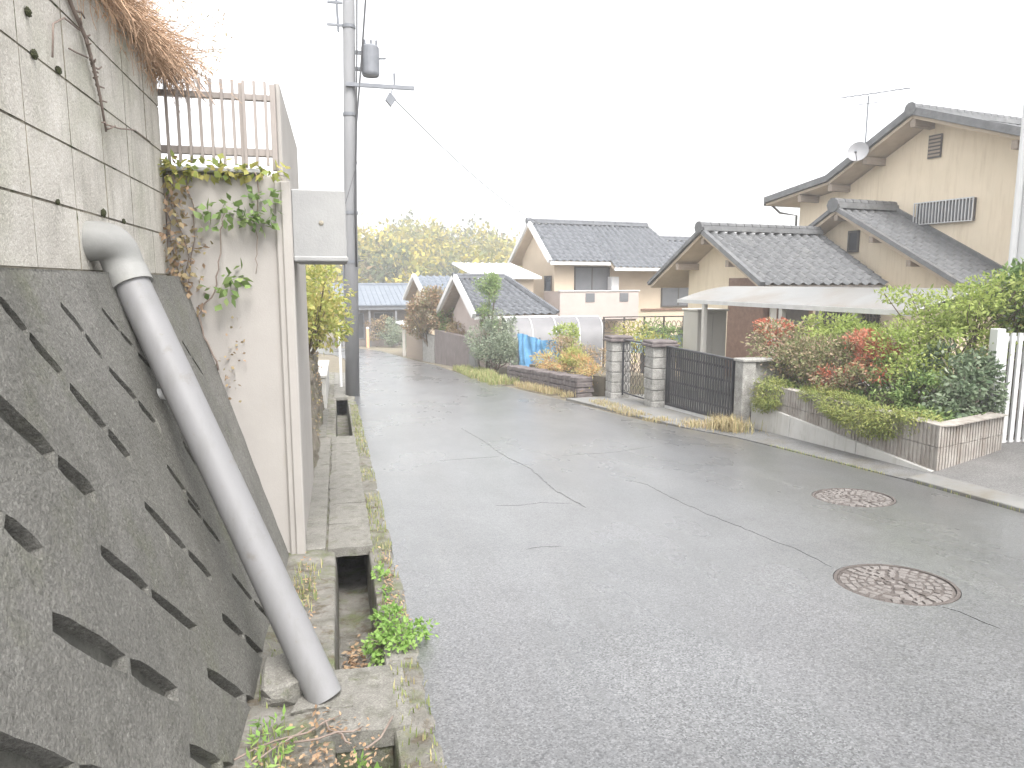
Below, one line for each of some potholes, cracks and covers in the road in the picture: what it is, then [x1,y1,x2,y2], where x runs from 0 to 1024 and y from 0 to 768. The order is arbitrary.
manhole cover [812,488,896,507]
manhole cover [833,564,961,606]
crack [462,429,584,507]
